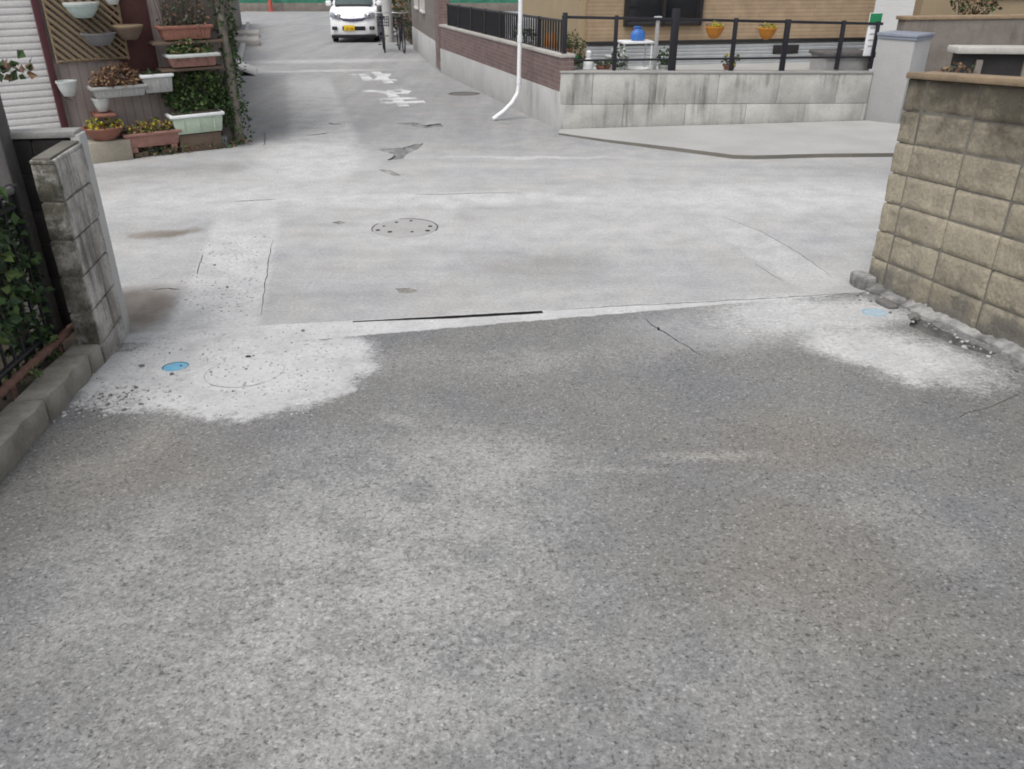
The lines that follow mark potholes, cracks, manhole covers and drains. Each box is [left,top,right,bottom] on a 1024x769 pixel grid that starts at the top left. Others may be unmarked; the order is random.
utility cover [860,309,888,317]
crack [561,292,864,356]
manhole cover [366,217,444,240]
utility cover [161,361,190,372]
manhole cover [193,355,295,391]
